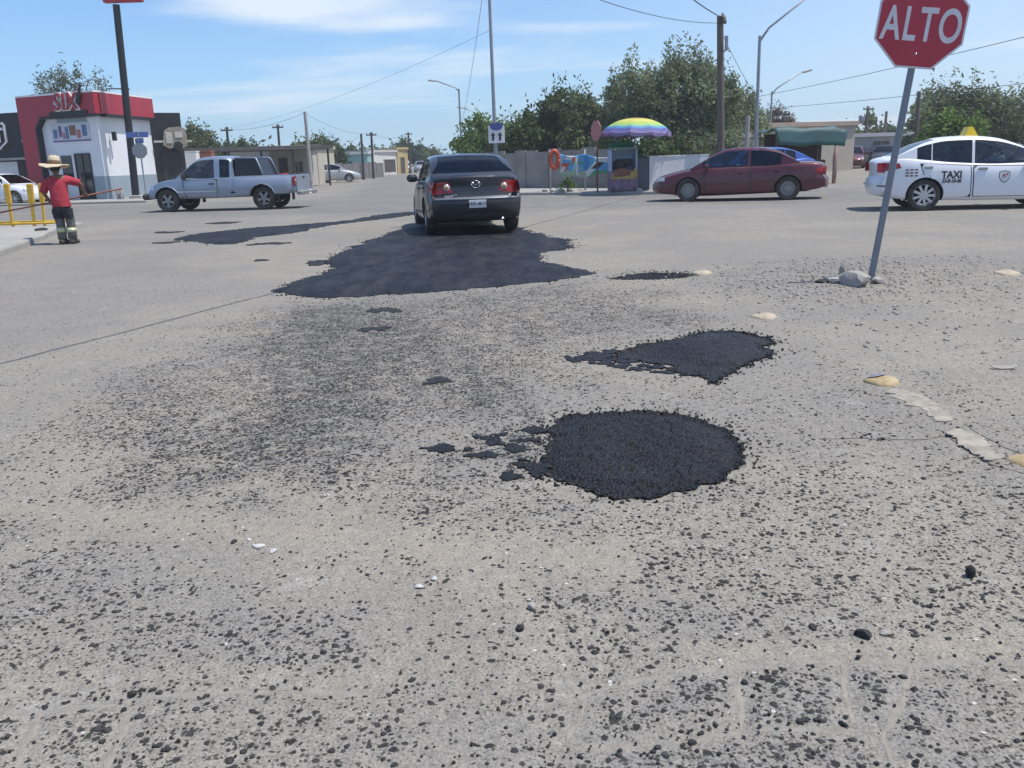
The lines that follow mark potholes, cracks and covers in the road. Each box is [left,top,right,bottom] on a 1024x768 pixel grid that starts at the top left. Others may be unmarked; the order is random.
crack [819,424,1024,474]
crack [549,657,1024,768]
